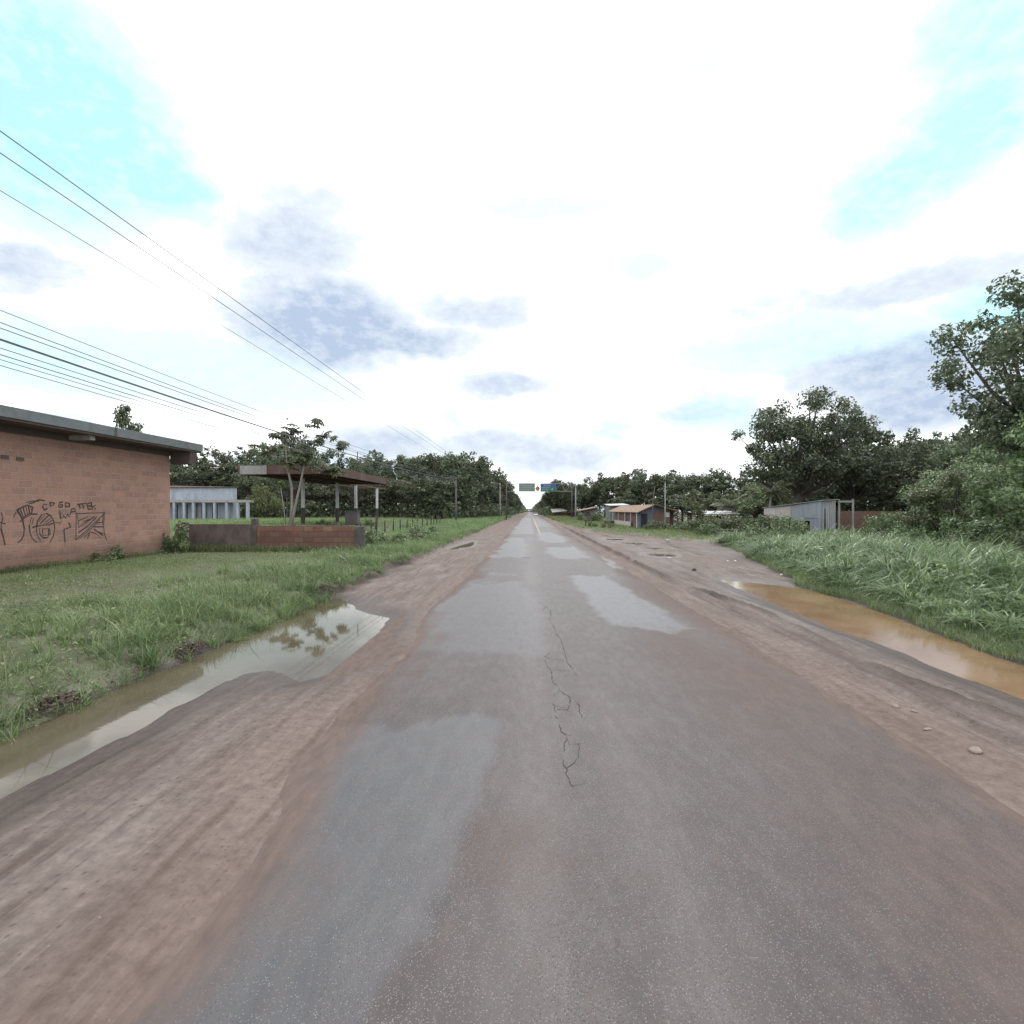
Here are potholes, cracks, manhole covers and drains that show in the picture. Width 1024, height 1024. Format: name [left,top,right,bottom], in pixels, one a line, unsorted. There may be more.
crack [542,607,583,786]
pothole [445,541,477,550]
